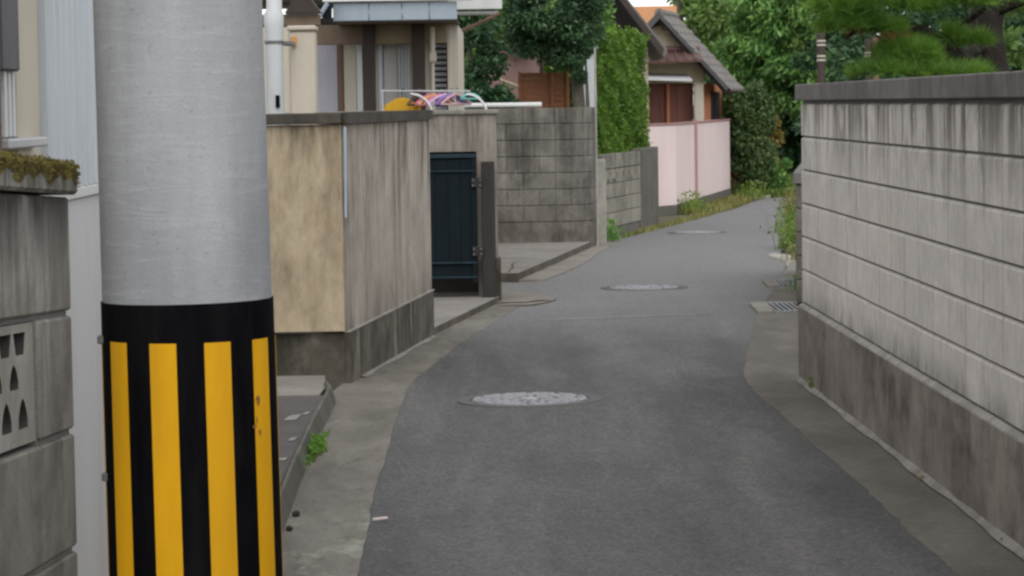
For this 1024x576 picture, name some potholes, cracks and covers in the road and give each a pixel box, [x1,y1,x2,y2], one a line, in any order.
drain grate [762,279,794,288]
drain grate [749,302,798,314]
manhole cover [457,392,602,407]
